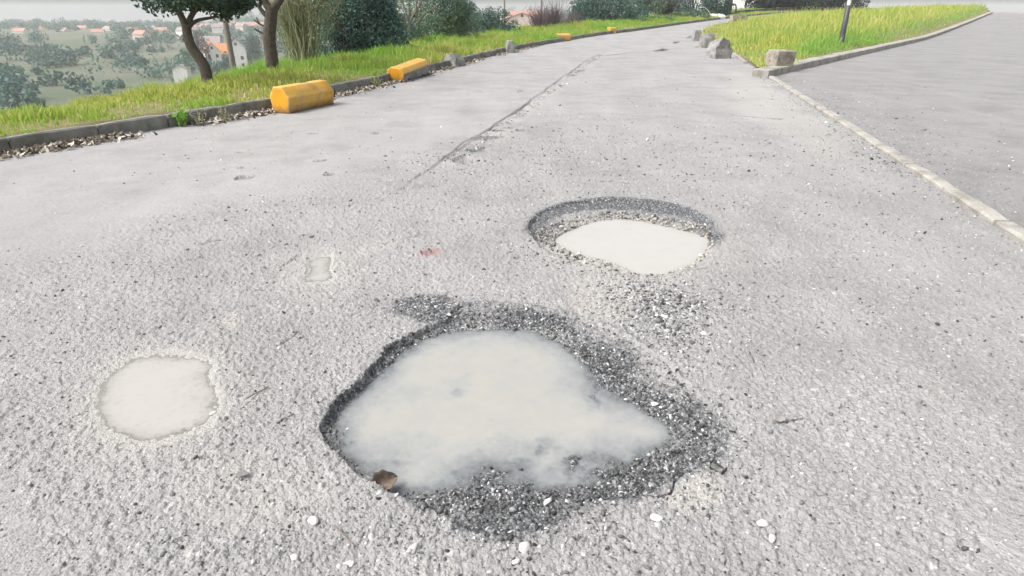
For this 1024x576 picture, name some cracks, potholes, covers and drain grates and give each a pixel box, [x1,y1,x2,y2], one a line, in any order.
pothole [316,301,726,540]
pothole [527,198,725,278]
pothole [87,347,227,451]
